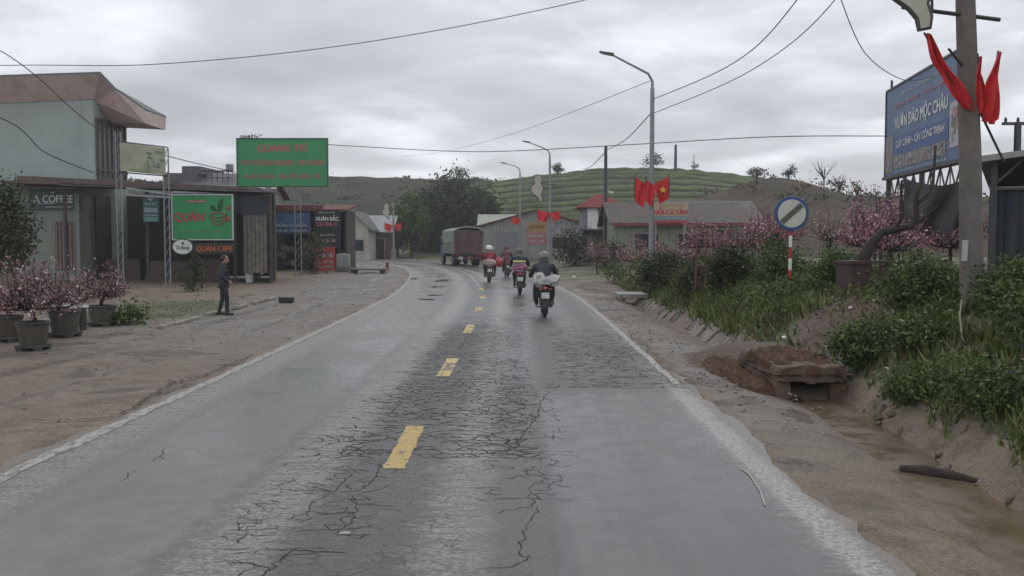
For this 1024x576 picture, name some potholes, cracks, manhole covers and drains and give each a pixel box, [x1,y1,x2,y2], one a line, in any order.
crack [314,318,578,569]
crack [552,325,695,388]
crack [204,435,397,576]
